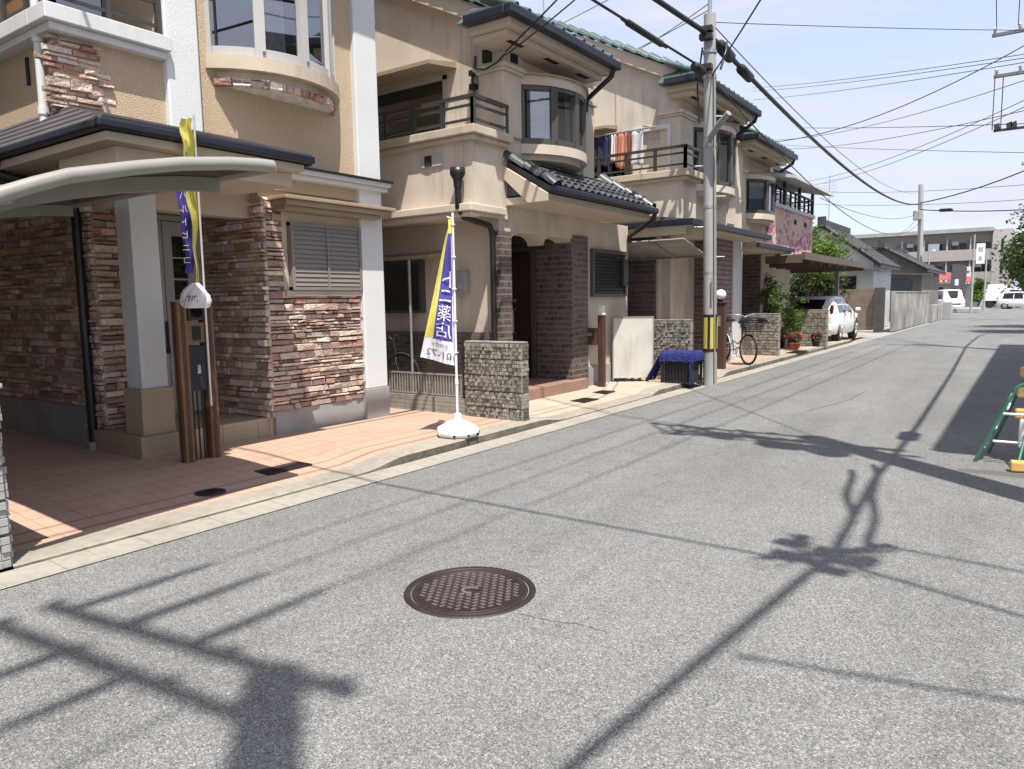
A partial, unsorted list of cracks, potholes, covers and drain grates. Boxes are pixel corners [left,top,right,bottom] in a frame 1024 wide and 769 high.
manhole cover [404,566,536,619]
drain grate [254,461,312,475]
